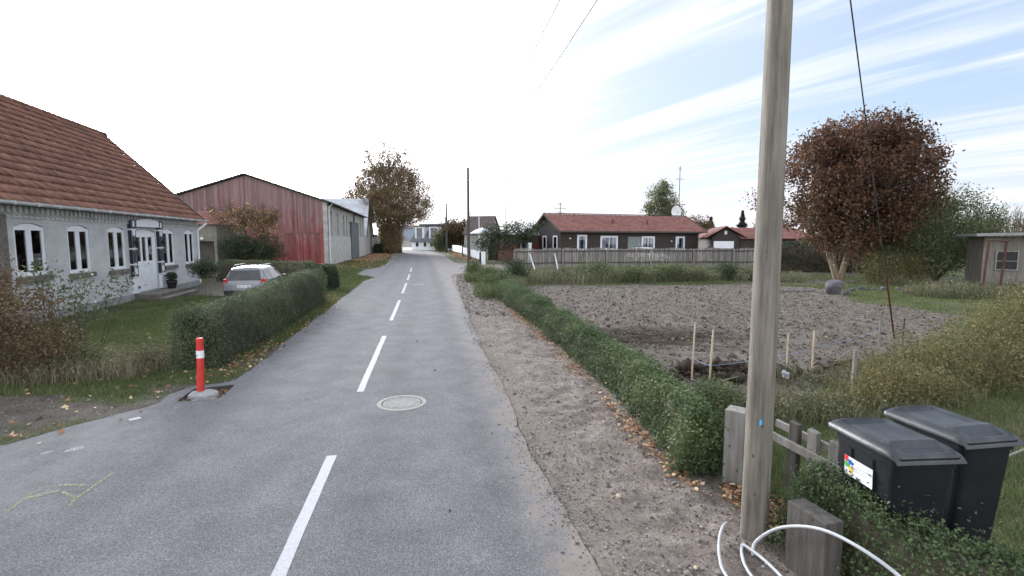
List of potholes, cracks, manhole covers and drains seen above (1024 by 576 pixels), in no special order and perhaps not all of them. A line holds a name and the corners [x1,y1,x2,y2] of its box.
manhole cover [377,395,427,411]
